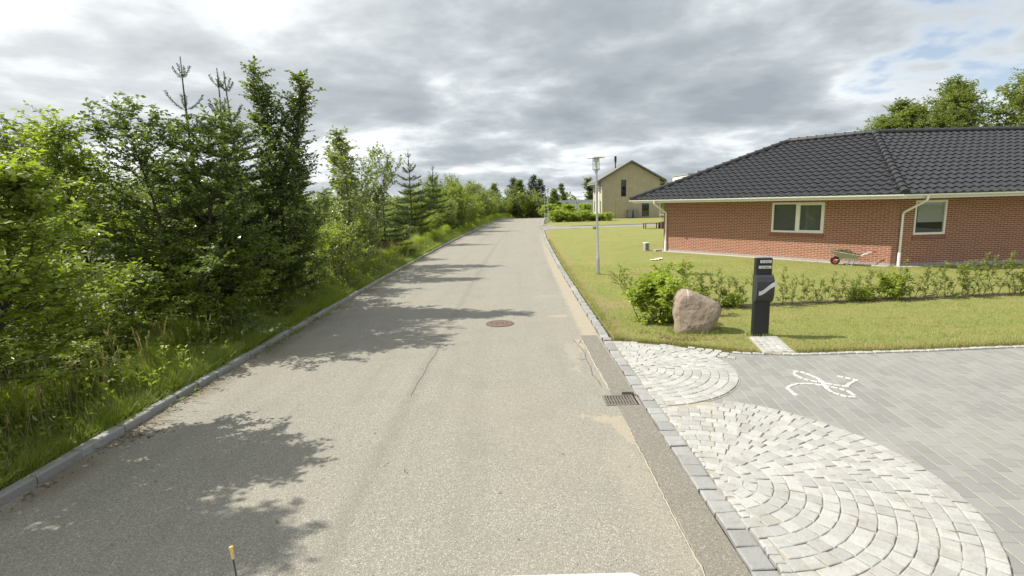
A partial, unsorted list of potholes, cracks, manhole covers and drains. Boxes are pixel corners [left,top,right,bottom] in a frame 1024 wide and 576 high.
crack [573,339,610,390]
drain grate [602,391,638,406]
